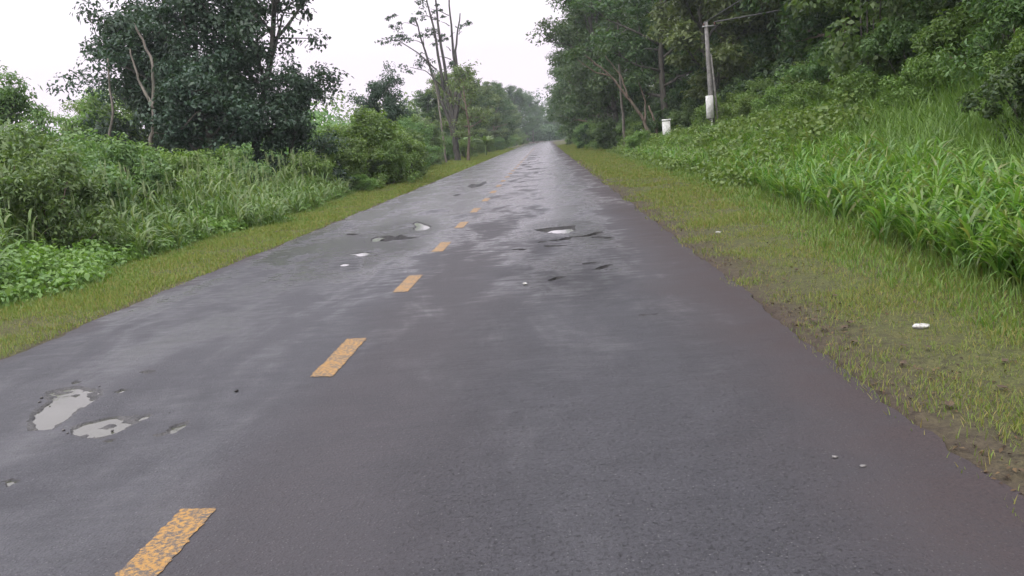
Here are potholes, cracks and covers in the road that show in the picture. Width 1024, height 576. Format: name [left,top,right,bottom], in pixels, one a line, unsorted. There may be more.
pothole [535,225,576,234]
pothole [66,412,170,439]
pothole [364,234,419,242]
pothole [26,385,104,431]
pothole [152,420,190,437]
pothole [410,221,432,231]
